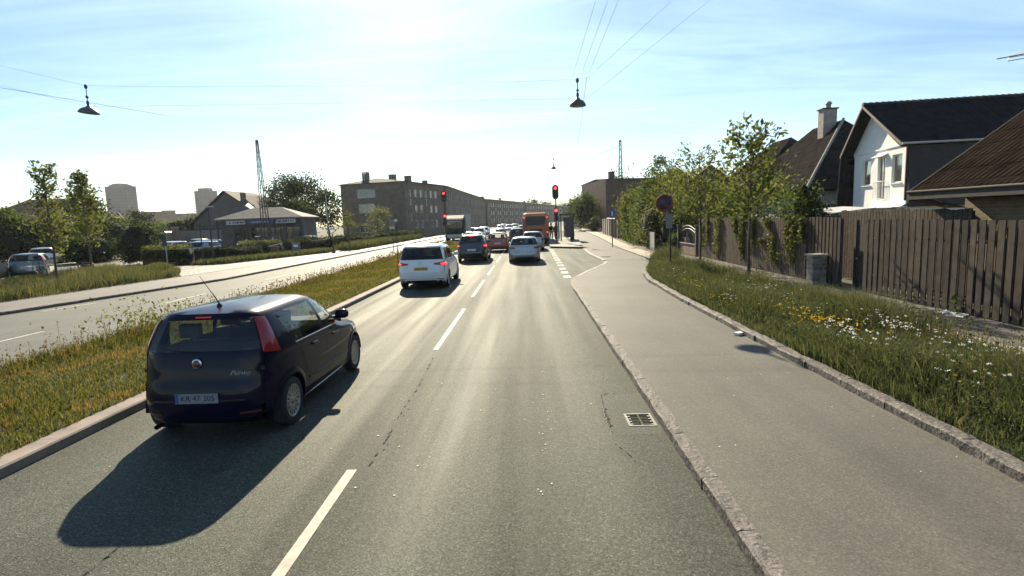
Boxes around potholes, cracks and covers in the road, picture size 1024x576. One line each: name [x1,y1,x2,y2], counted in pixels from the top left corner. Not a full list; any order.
crack [369,358,433,465]
drain grate [623,413,658,427]
crack [601,393,635,462]
